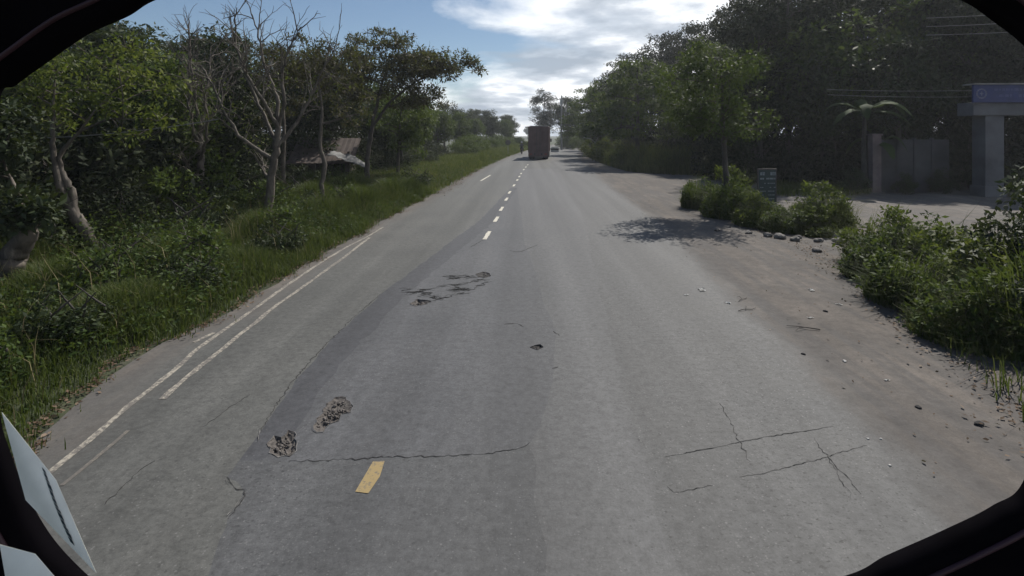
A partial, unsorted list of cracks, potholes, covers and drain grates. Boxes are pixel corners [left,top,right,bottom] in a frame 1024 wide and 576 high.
pothole [312,396,355,433]
crack [666,404,867,490]
pothole [267,430,297,457]
crack [292,444,528,462]
